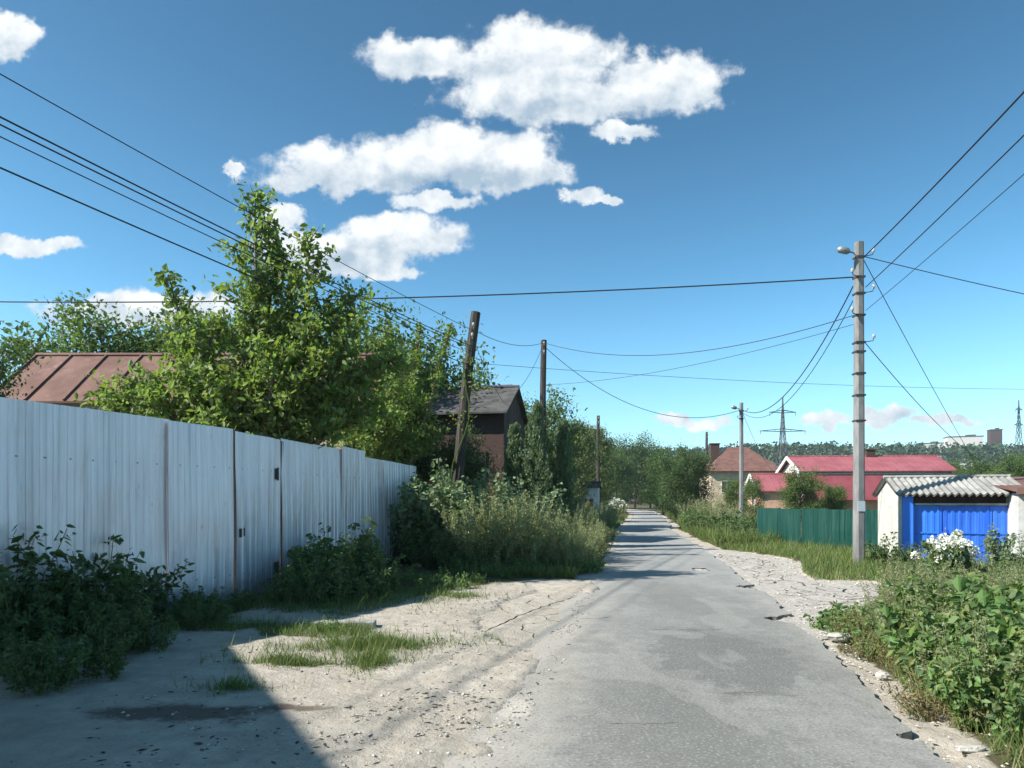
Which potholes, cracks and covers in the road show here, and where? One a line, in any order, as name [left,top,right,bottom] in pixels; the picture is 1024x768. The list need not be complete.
crack [485,595,573,638]
